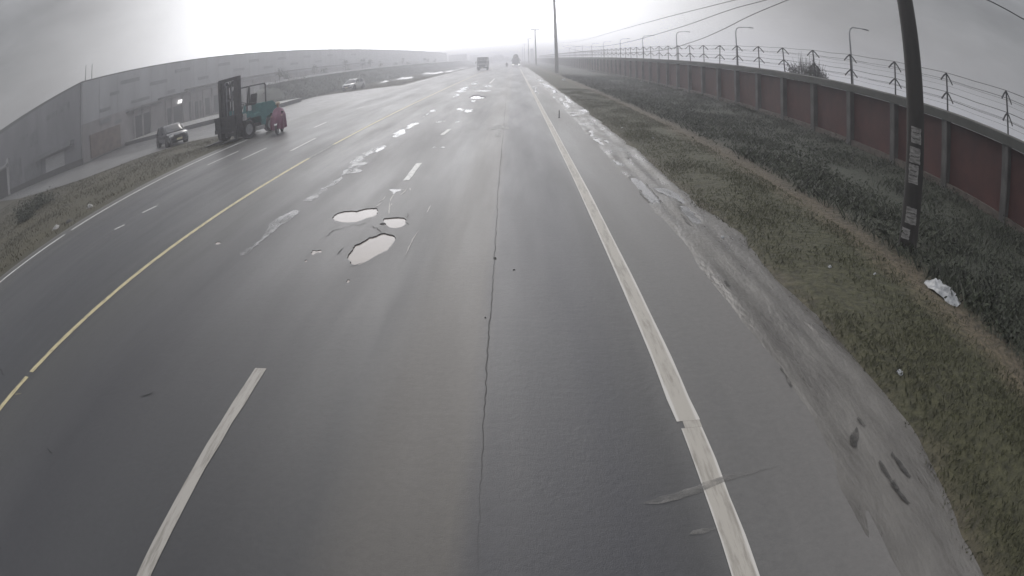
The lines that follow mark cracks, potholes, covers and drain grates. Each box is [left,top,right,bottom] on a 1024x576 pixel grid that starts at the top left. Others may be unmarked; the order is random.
pothole [347,233,396,265]
pothole [383,217,406,228]
pothole [332,208,378,223]
